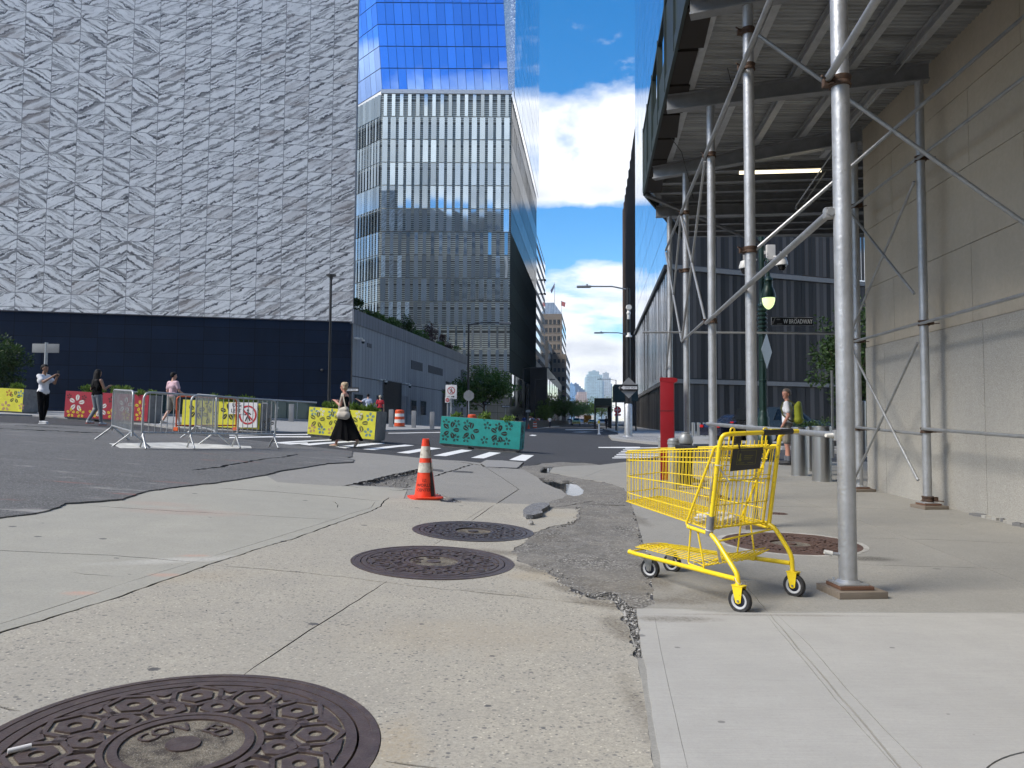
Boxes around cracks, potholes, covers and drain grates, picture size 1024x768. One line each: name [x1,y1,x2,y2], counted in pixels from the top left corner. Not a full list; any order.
manhole cover [351,546,514,580]
manhole cover [717,532,869,556]
manhole cover [412,521,534,542]
crack [0,454,418,633]
pothole [352,470,418,488]
manhole cover [0,674,380,768]
